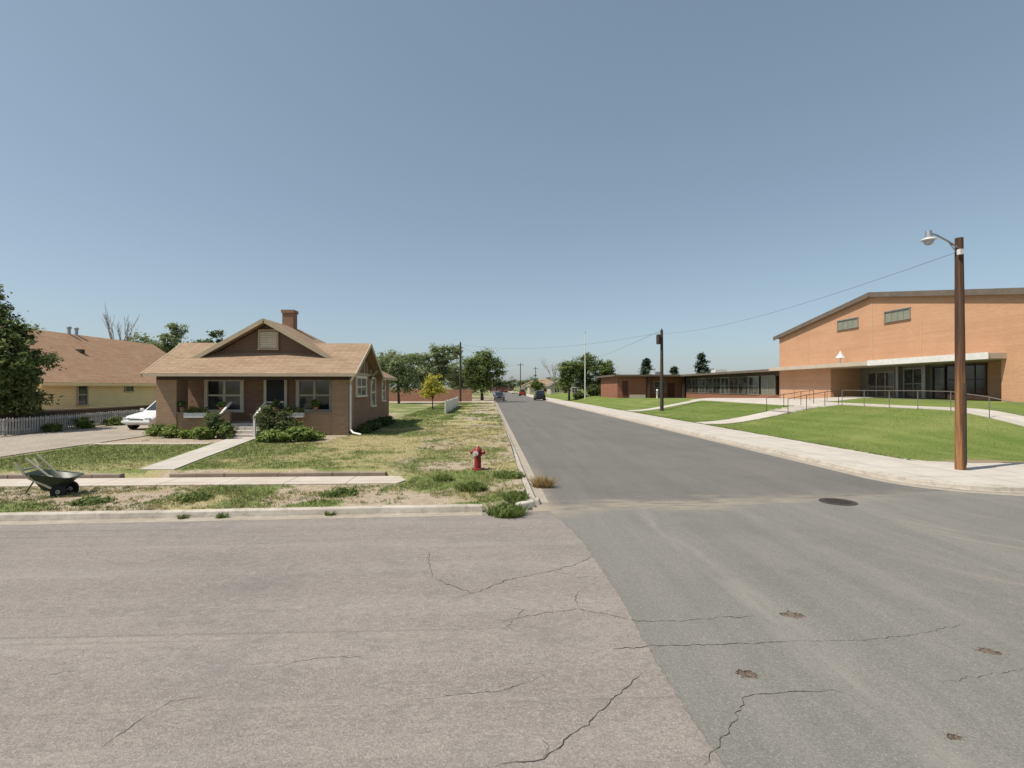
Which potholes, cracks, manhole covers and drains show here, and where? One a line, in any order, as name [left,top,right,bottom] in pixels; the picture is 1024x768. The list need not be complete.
crack [502,592,745,627]
crack [506,677,638,763]
manhole cover [818,498,858,506]
pothole [975,647,1010,657]
crack [624,624,960,648]
crack [703,690,840,766]
pothole [733,666,761,679]
pothole [778,610,811,619]
crack [428,552,592,598]
